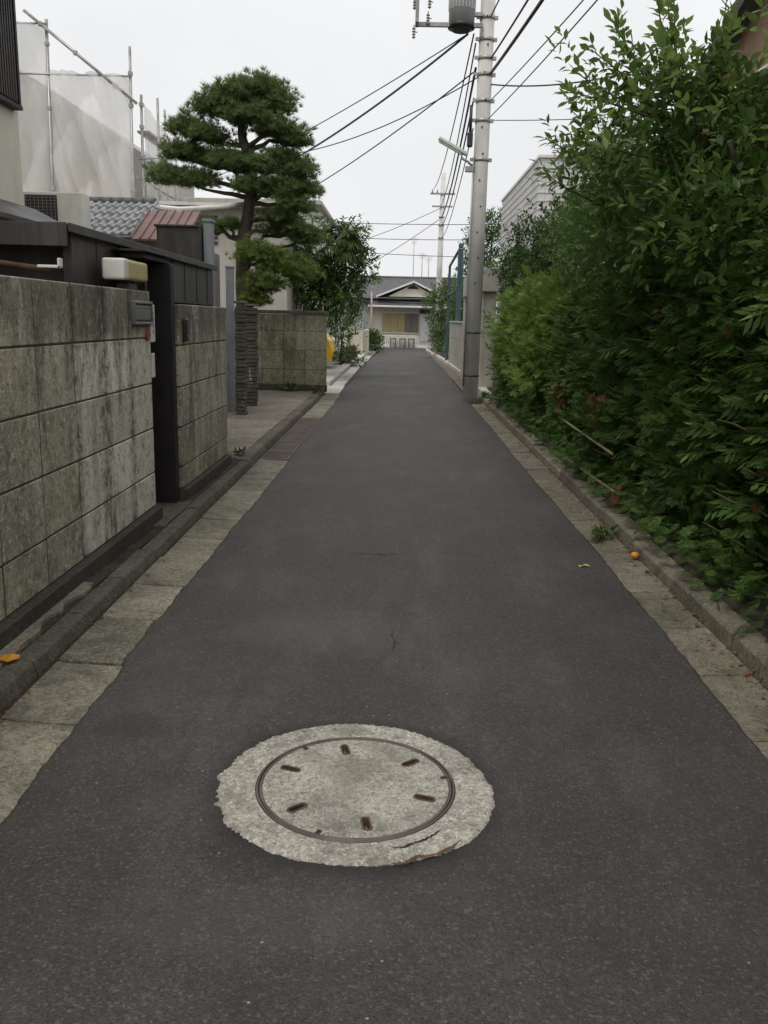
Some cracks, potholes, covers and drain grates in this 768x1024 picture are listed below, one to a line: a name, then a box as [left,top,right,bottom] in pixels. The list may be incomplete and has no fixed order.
crack [382,828,462,866]
manhole cover [214,723,495,867]
